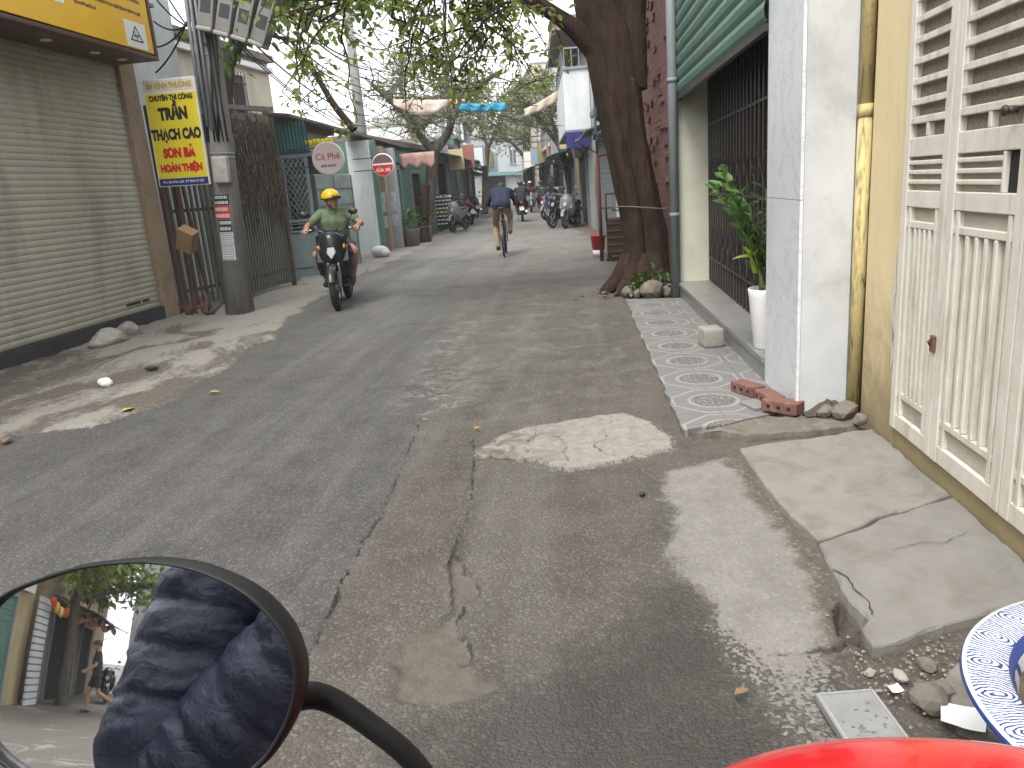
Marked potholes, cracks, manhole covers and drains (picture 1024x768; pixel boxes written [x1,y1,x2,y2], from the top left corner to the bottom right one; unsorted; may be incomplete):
crack [833,569,873,614]
crack [455,427,644,667]
